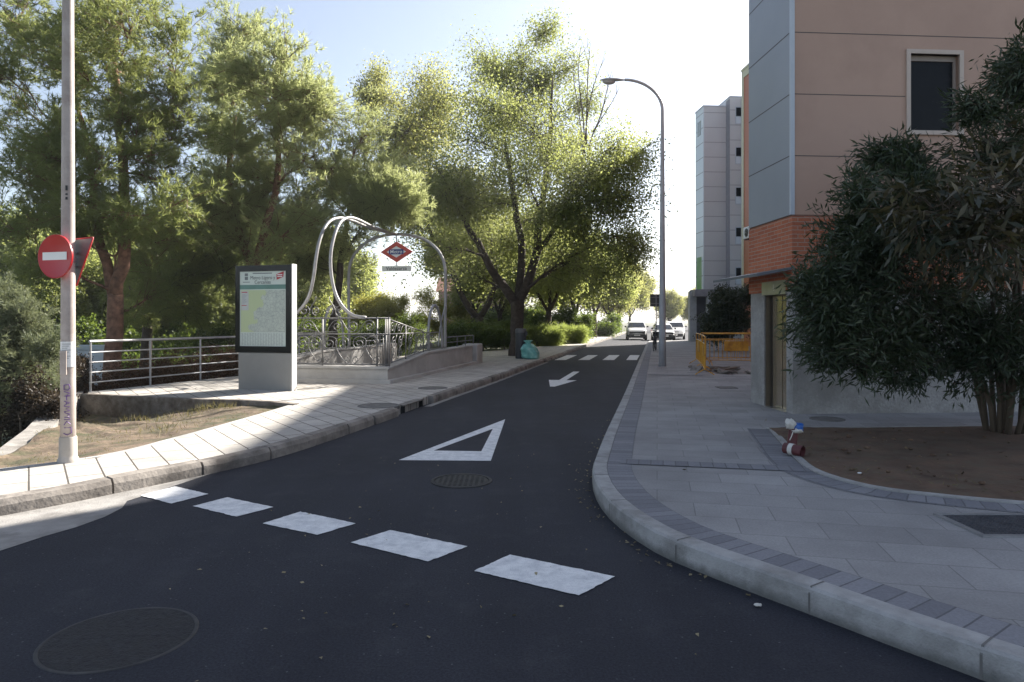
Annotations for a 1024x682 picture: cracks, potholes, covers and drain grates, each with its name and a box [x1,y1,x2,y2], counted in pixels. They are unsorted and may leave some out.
manhole cover [33,607,199,675]
manhole cover [431,473,492,488]
